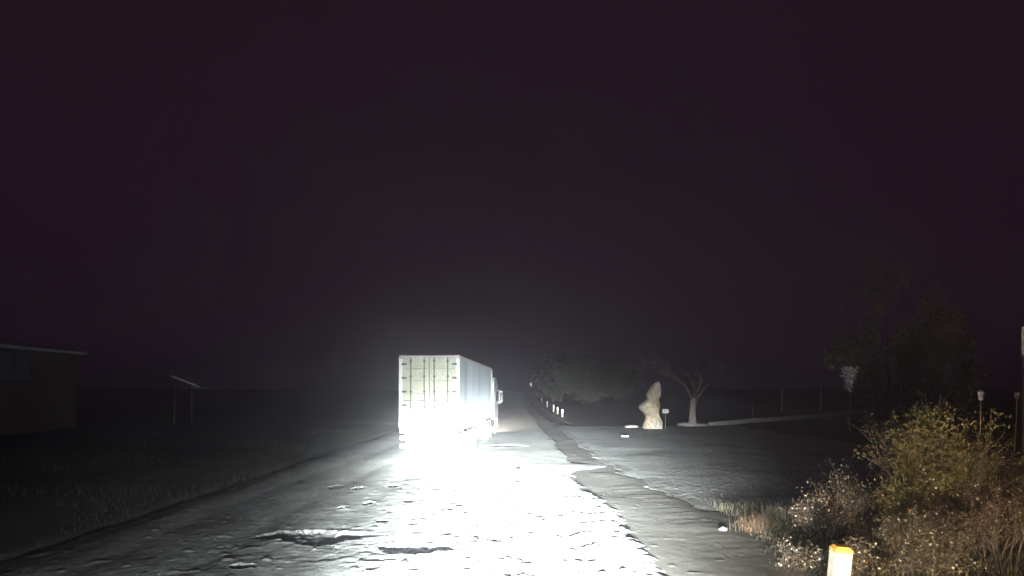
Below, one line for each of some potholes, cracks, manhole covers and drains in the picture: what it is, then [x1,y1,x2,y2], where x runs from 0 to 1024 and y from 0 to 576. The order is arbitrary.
pothole [365,541,464,556]
pothole [238,529,400,548]
pothole [223,562,262,570]
